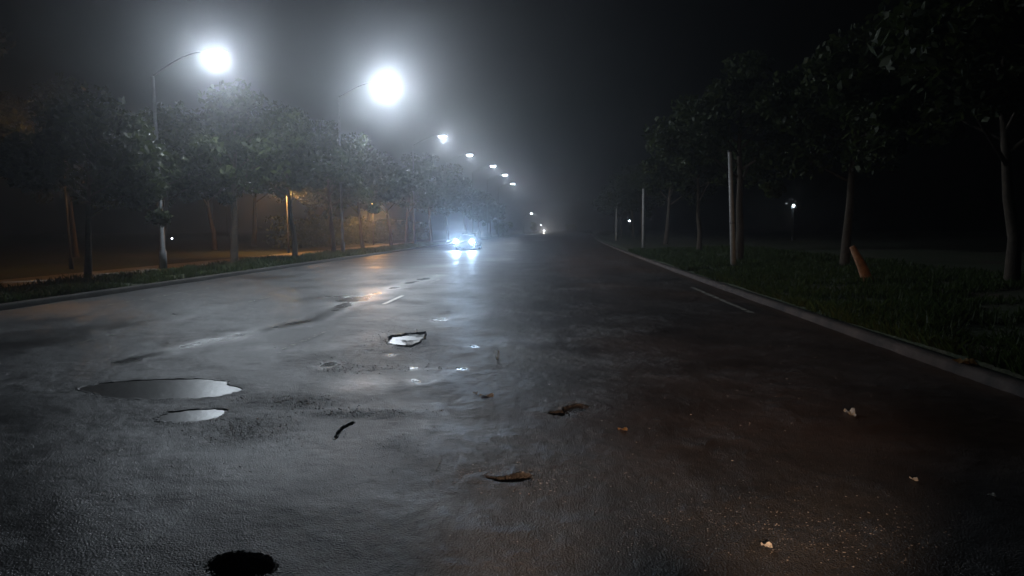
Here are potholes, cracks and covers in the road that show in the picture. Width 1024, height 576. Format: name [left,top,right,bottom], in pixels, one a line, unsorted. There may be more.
pothole [387,331,427,347]
pothole [75,378,243,400]
pothole [153,408,228,423]
pothole [202,550,281,576]
crack [332,421,355,440]
